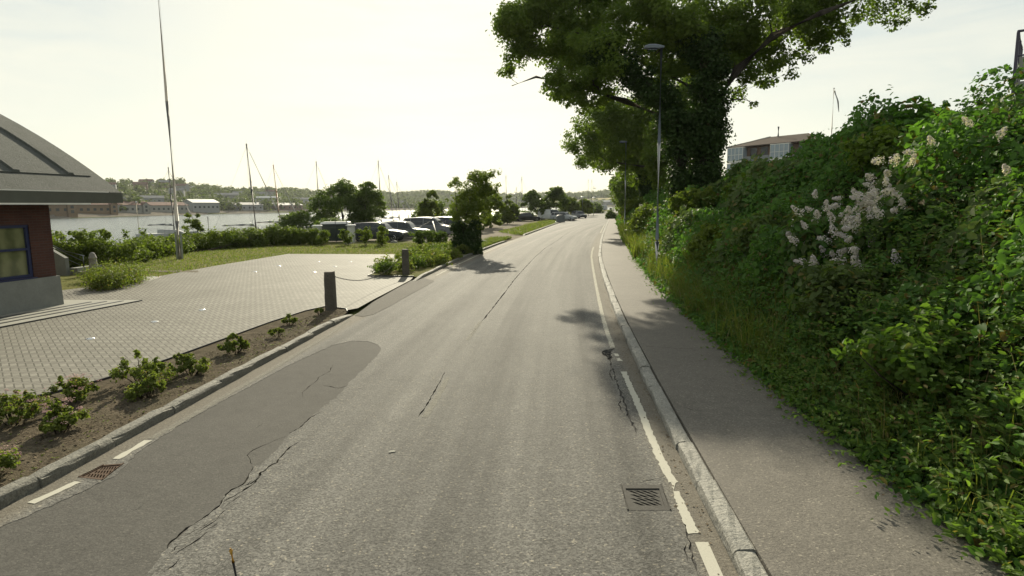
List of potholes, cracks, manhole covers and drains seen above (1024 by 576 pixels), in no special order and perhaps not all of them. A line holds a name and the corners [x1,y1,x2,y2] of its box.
crack [160,413,318,574]
drain grate [78,463,124,480]
crack [684,524,698,573]
crack [609,361,638,434]
drain grate [620,484,671,510]
